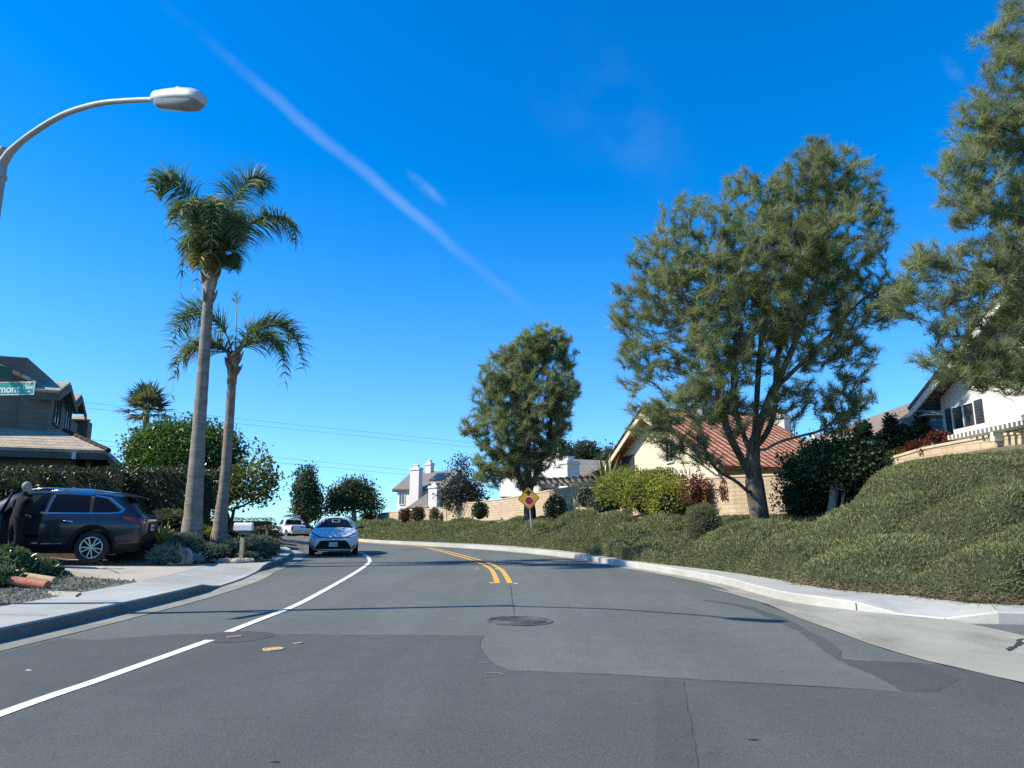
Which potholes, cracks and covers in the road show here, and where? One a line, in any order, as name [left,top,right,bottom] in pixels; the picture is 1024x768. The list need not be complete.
manhole cover [486,616,554,626]
